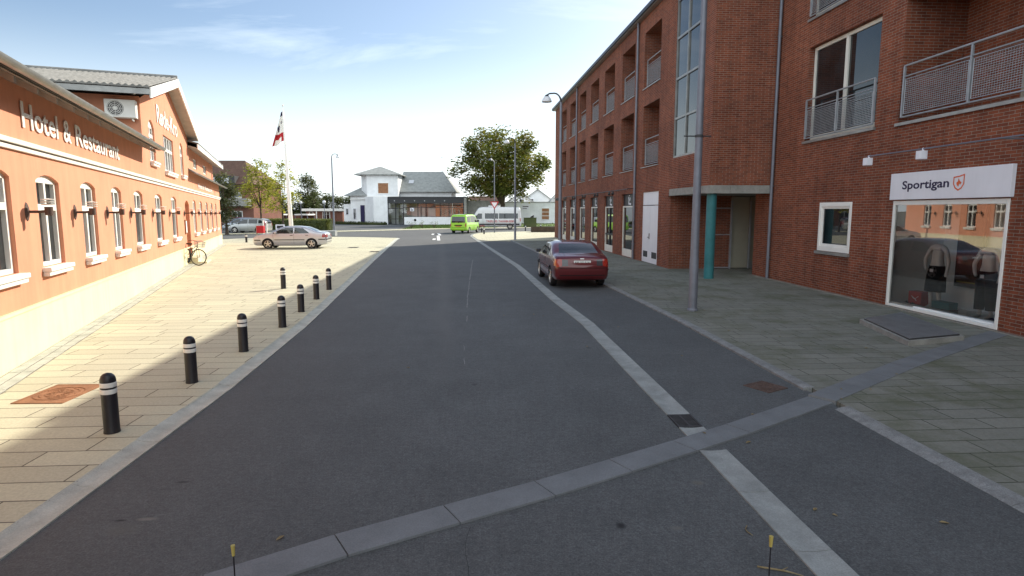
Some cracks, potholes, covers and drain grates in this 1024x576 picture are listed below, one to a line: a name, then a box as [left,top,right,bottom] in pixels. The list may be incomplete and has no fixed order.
manhole cover [10,384,99,404]
manhole cover [743,381,788,393]
drain grate [667,414,703,428]
